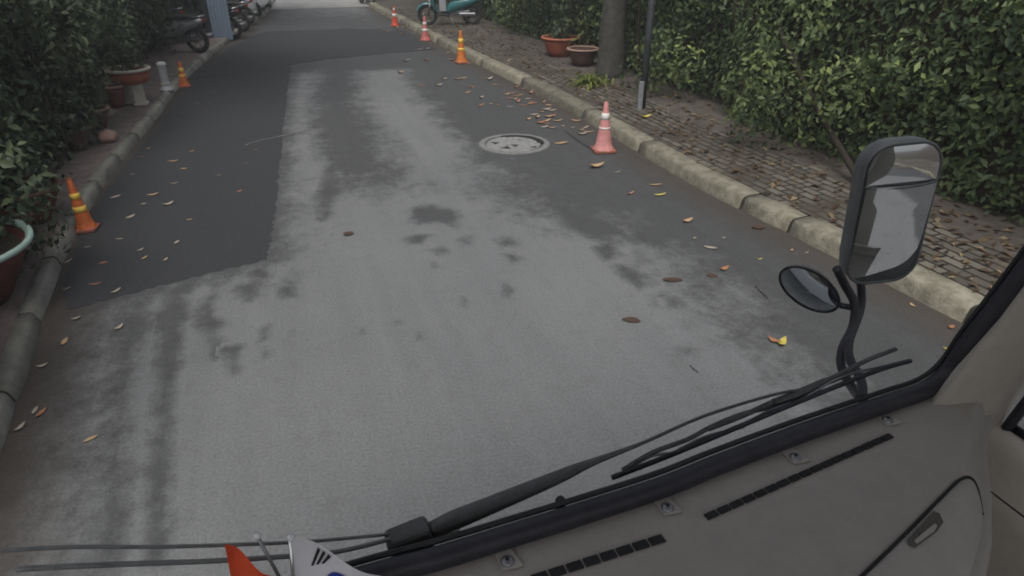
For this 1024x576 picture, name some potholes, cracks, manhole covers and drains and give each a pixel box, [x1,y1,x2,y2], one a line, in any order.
manhole cover [479,134,550,155]
